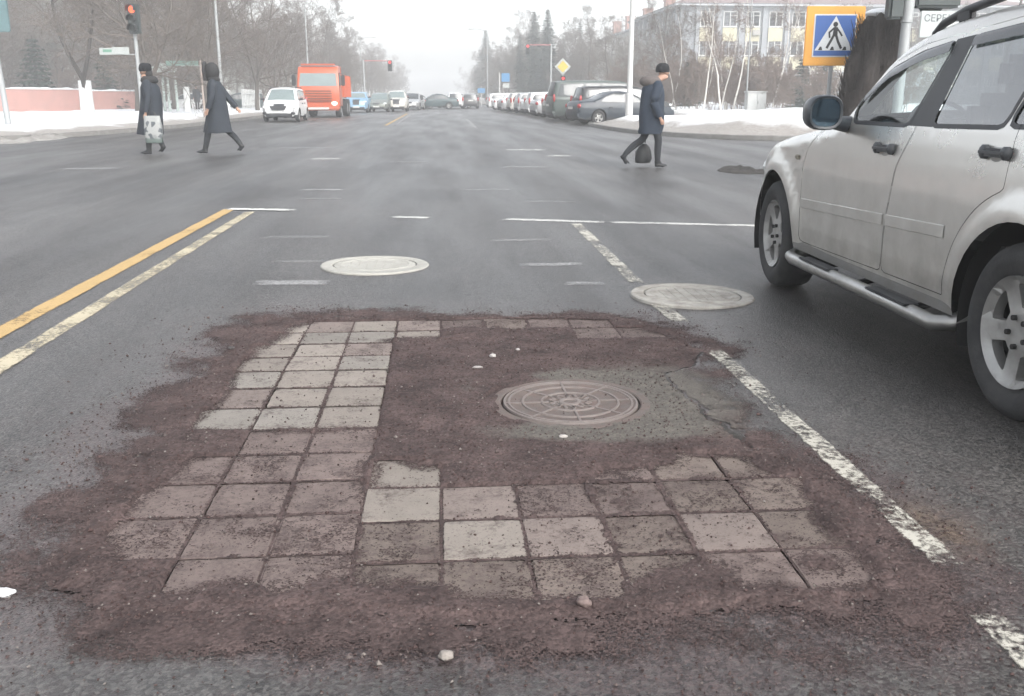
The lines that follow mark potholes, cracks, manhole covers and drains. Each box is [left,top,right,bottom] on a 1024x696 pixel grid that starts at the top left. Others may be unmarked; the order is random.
manhole cover [495,379,651,429]
manhole cover [630,283,755,310]
manhole cover [320,256,429,276]
